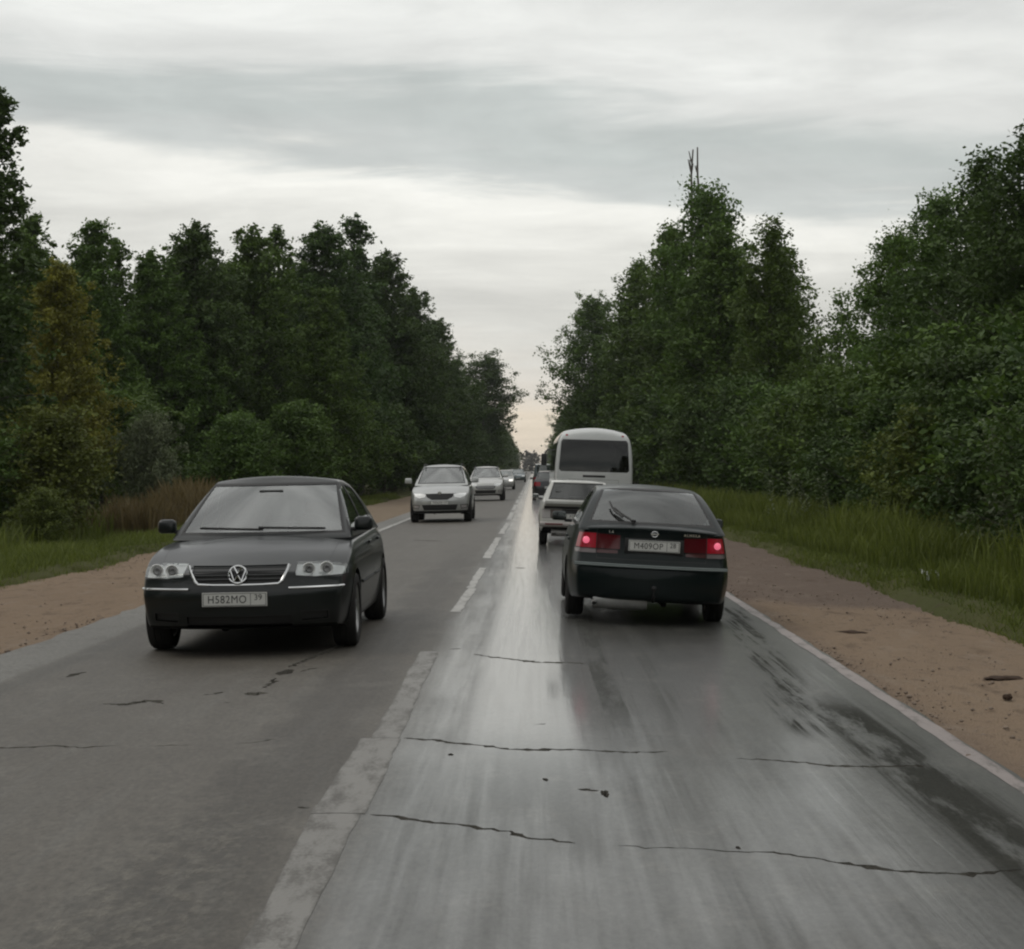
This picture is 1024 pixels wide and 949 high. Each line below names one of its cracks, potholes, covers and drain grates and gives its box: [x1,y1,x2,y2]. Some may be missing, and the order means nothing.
crack [263,645,342,693]
crack [738,758,924,767]
crack [636,846,1018,877]
crack [406,738,665,753]
crack [474,654,584,664]
crack [374,815,573,843]
crack [0,739,272,748]
